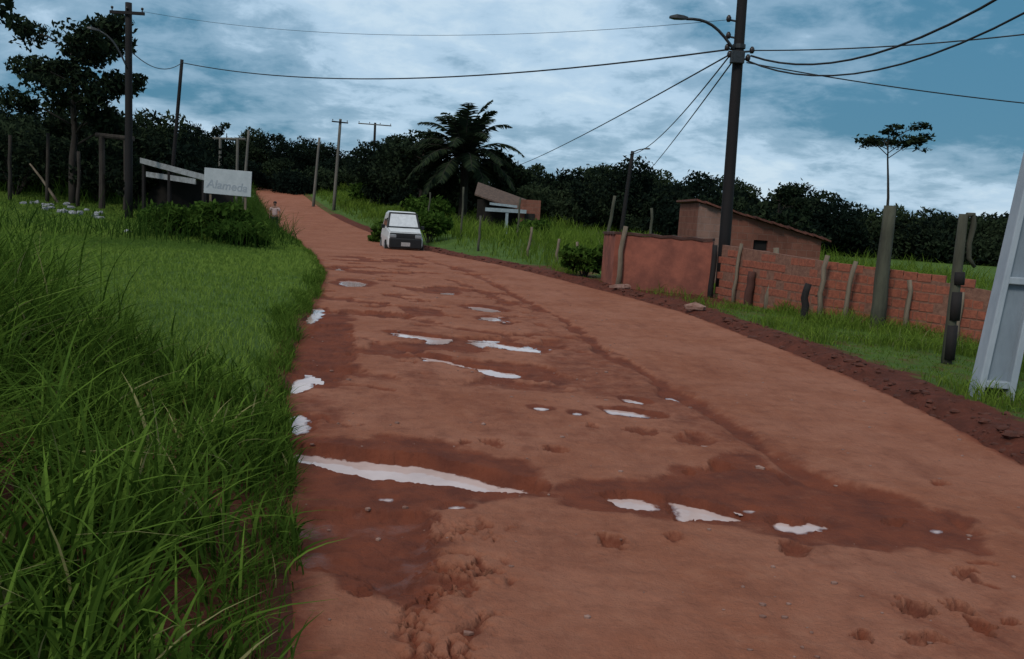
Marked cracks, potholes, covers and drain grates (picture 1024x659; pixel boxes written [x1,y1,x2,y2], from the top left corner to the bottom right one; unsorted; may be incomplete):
pothole [288,411,320,438]
pothole [596,406,673,420]
pothole [287,374,324,394]
pothole [760,515,836,534]
pothole [329,278,377,287]
pothole [464,340,554,354]
pothole [613,395,655,406]
pothole [380,330,453,345]
pothole [594,489,756,522]
pothole [288,439,554,495]
pothole [291,324,359,385]
pothole [450,363,526,379]
